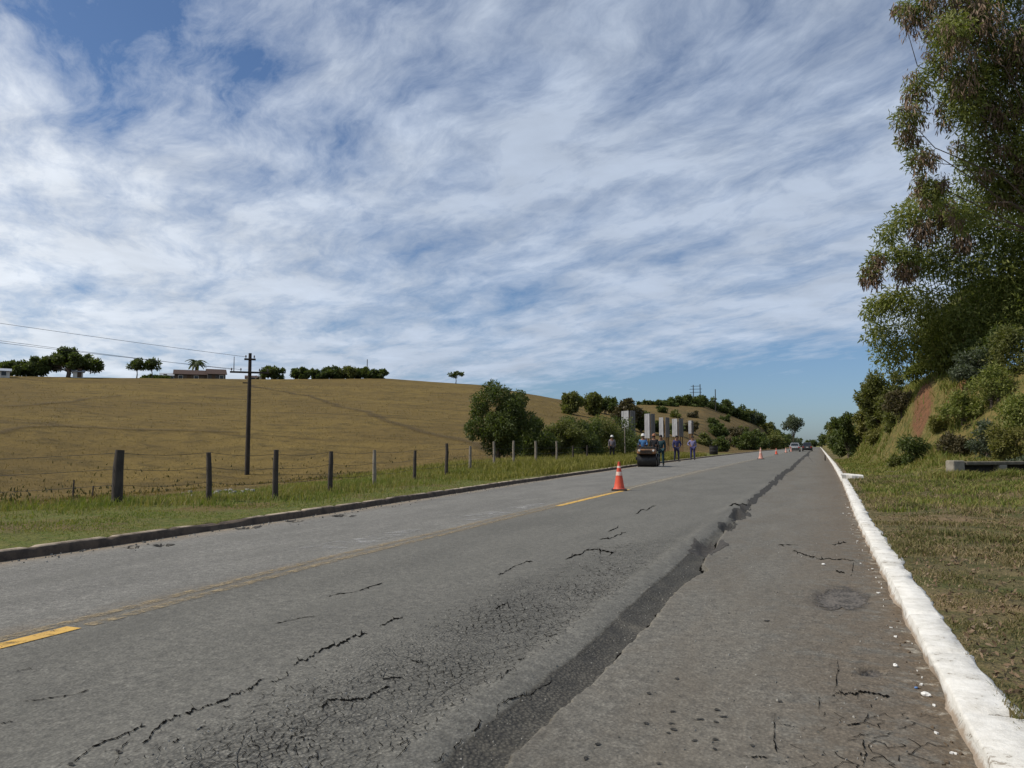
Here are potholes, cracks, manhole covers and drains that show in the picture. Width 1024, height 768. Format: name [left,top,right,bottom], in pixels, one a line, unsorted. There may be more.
crack [434,680,553,762]
crack [746,717,796,759]
crack [528,450,813,741]
crack [60,641,534,768]
crack [399,527,674,650]
crack [795,650,952,768]
crack [779,541,854,575]
